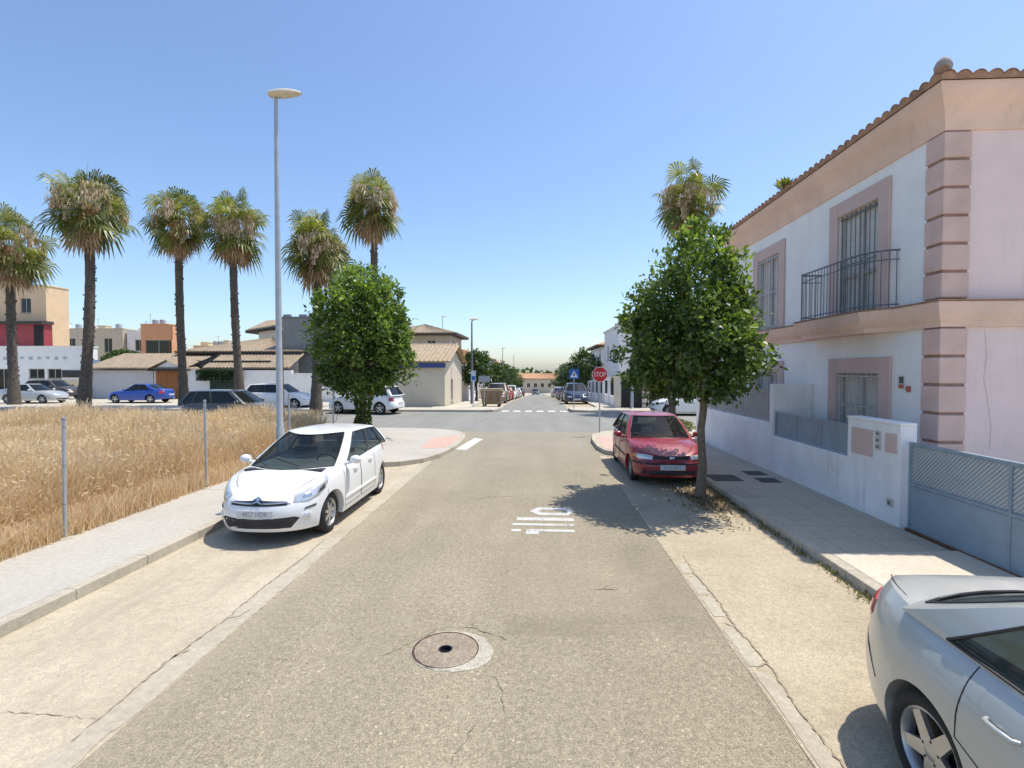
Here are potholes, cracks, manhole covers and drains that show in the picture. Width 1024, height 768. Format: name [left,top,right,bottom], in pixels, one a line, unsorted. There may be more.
manhole cover [410,631,494,672]
